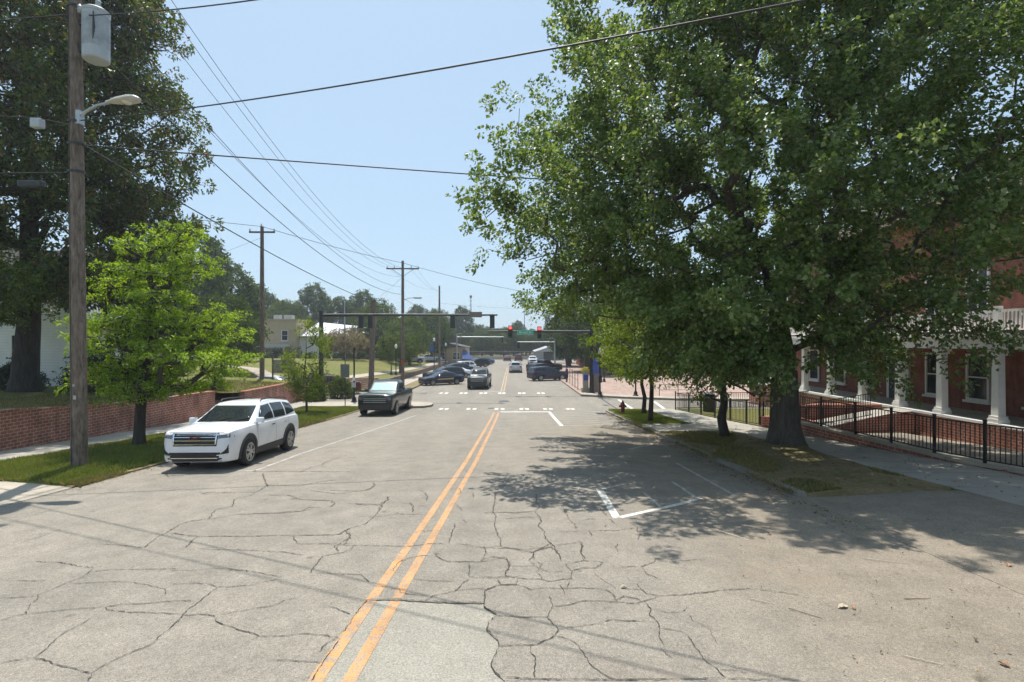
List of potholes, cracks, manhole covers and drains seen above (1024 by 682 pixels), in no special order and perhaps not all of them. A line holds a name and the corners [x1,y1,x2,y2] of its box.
crack [5,458,800,680]
